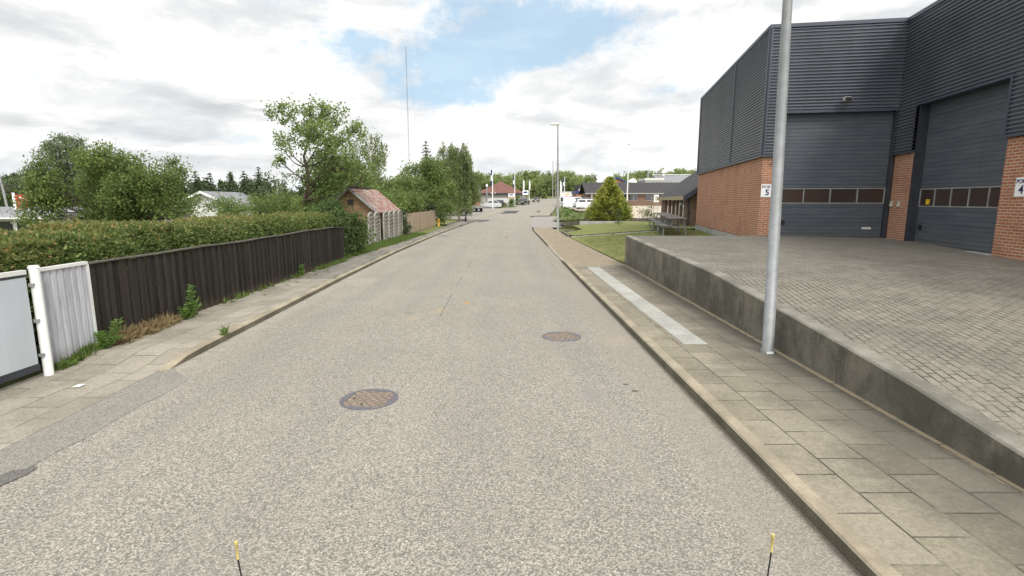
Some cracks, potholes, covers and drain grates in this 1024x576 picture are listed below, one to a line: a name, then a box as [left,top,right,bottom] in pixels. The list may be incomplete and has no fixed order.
manhole cover [542,331,581,342]
manhole cover [339,389,398,410]
